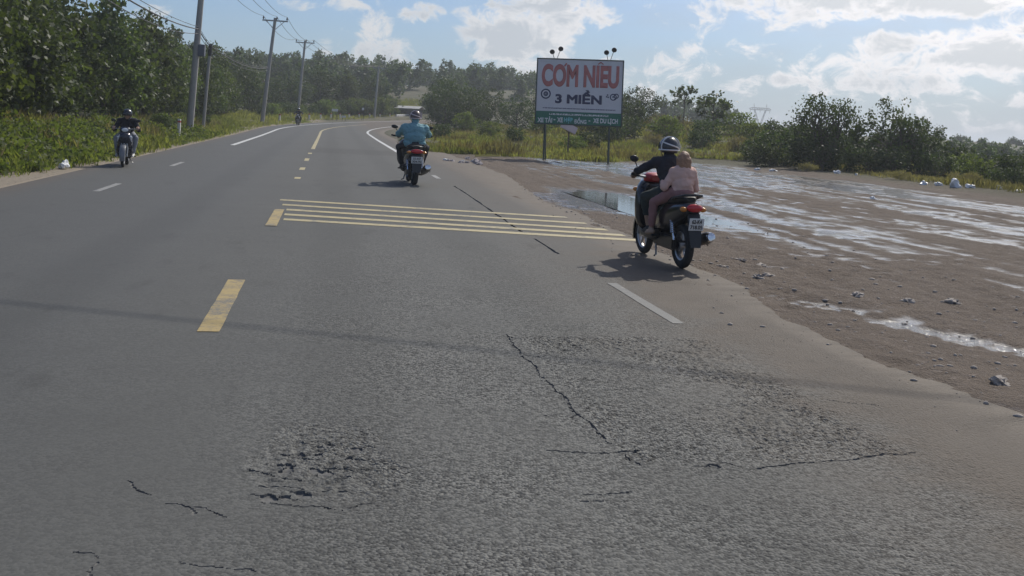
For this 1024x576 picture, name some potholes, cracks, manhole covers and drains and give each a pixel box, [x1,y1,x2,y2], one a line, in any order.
crack [127,480,227,518]
crack [72,551,100,576]
crack [178,562,256,572]
crack [506,334,642,466]
crack [694,452,916,470]
